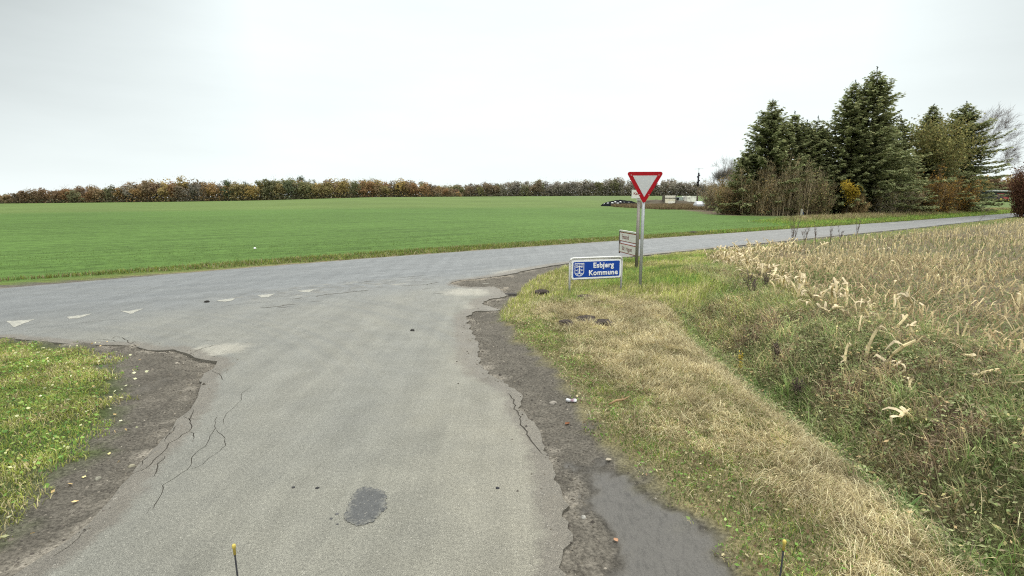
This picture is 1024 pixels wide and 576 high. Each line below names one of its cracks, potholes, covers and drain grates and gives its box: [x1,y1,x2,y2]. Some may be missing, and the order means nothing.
crack [142,394,242,507]
crack [510,396,538,449]
